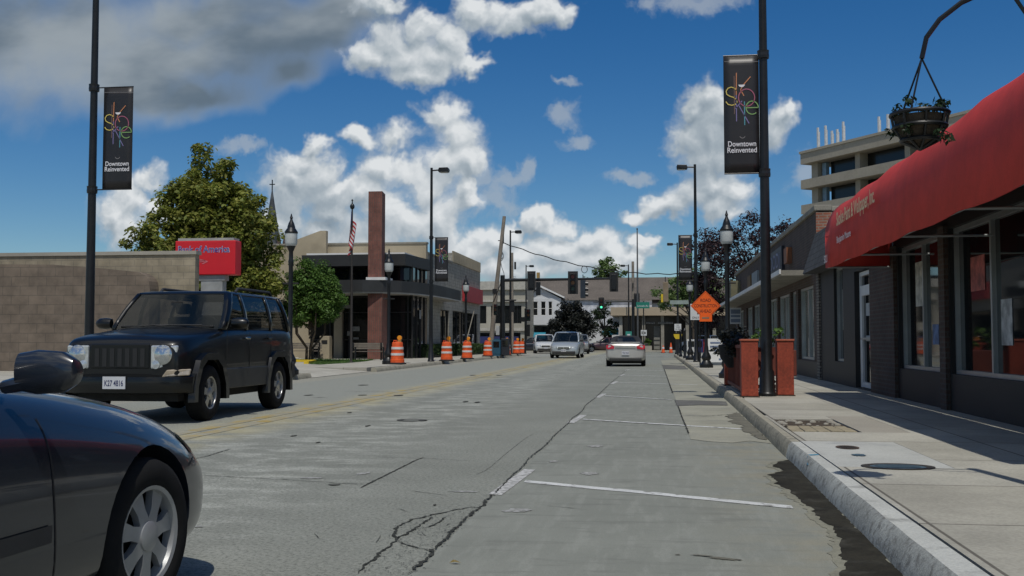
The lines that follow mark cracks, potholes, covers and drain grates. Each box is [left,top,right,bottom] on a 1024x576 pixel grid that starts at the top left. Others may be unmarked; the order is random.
crack [350,370,627,573]
